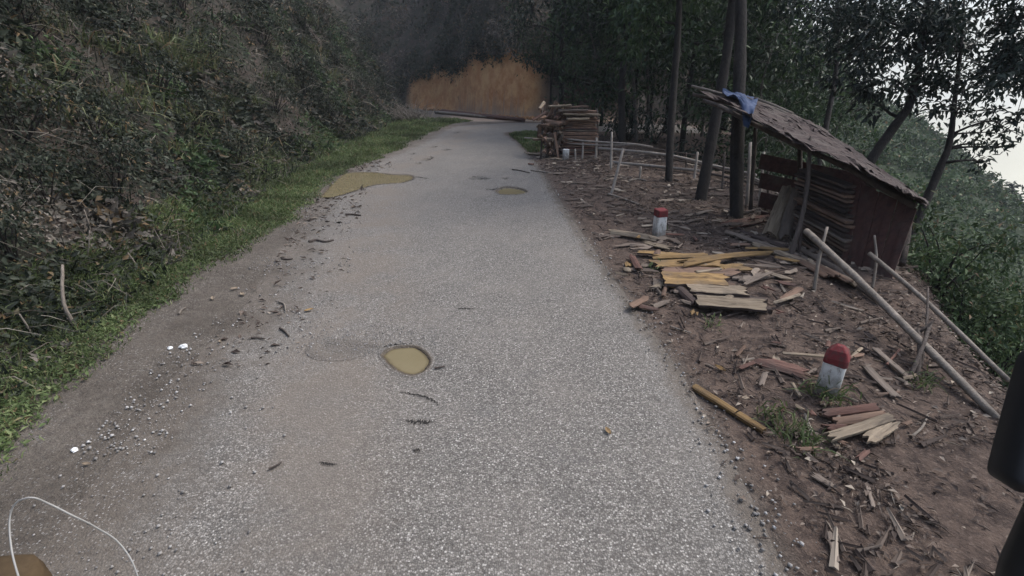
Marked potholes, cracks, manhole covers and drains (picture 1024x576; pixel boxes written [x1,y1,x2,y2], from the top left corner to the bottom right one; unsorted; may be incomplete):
pothole [378,344,435,377]
crack [401,392,438,426]
pothole [318,172,416,198]
pothole [494,186,530,195]
